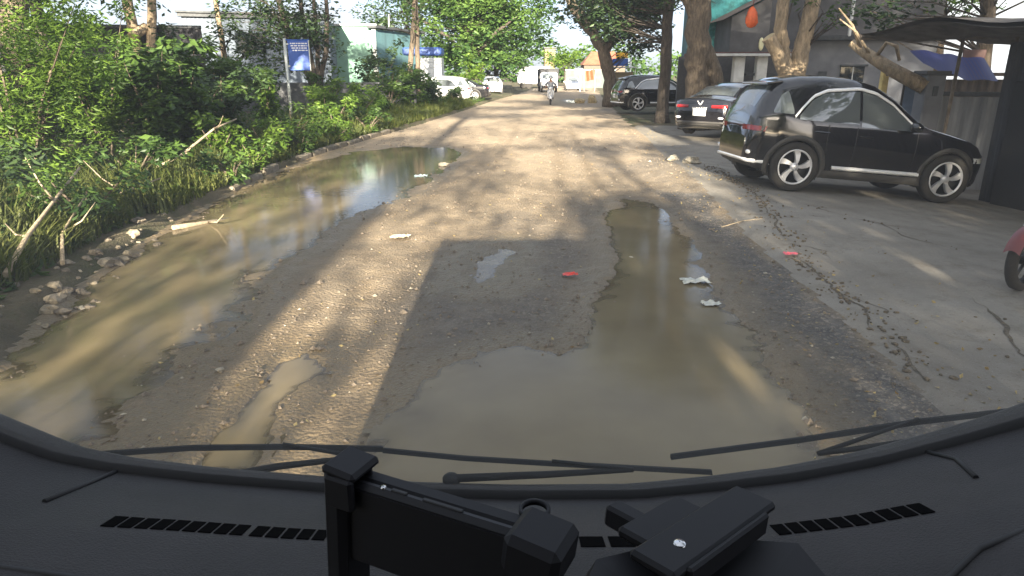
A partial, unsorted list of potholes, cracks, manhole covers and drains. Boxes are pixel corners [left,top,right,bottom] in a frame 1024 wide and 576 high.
crack [973,299,1024,358]
crack [697,164,959,385]
pothole [362,197,852,484]
pothole [0,147,467,451]
